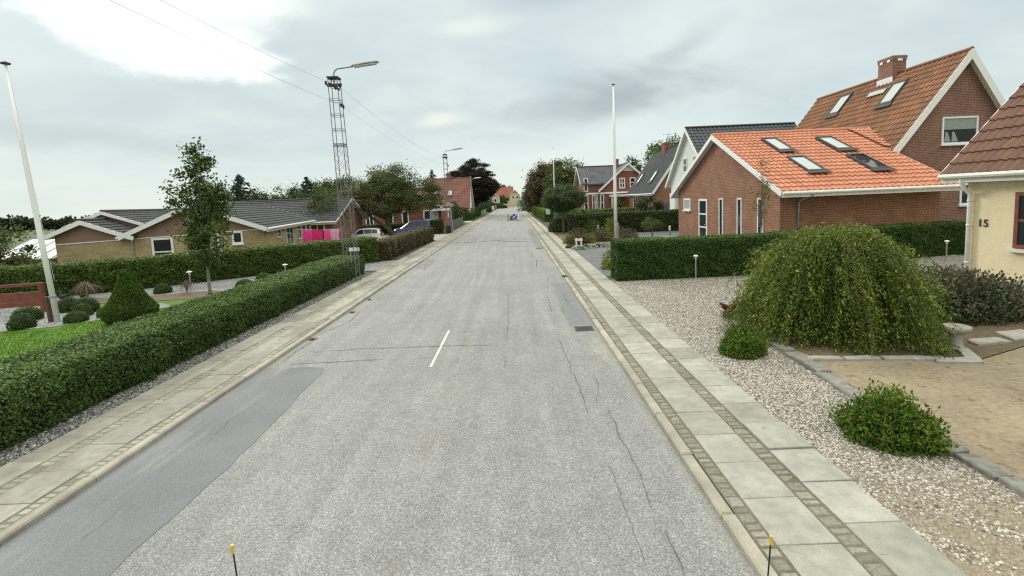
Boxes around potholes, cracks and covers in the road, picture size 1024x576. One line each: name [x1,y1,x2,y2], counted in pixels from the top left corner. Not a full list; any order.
crack [560,343,684,575]
